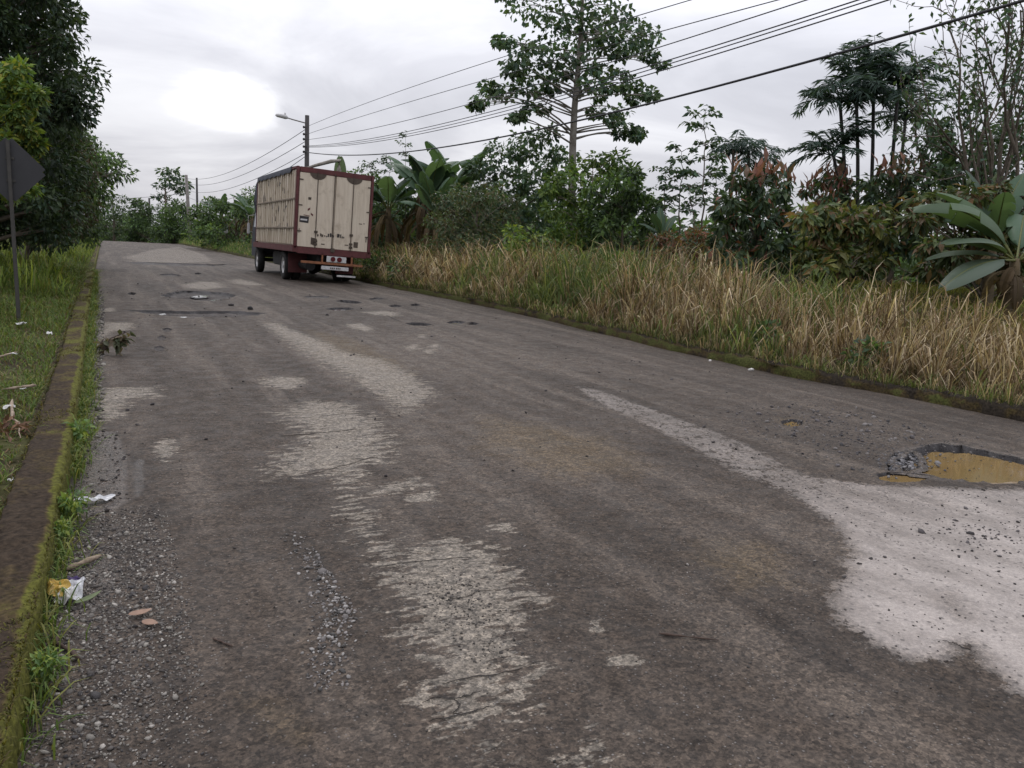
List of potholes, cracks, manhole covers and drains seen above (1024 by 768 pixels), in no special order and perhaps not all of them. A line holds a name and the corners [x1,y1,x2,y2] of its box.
pothole [888,442,1024,486]
pothole [880,450,928,475]
pothole [776,418,808,428]
crack [378,557,465,567]
pothole [870,471,940,485]
crack [422,668,522,722]
